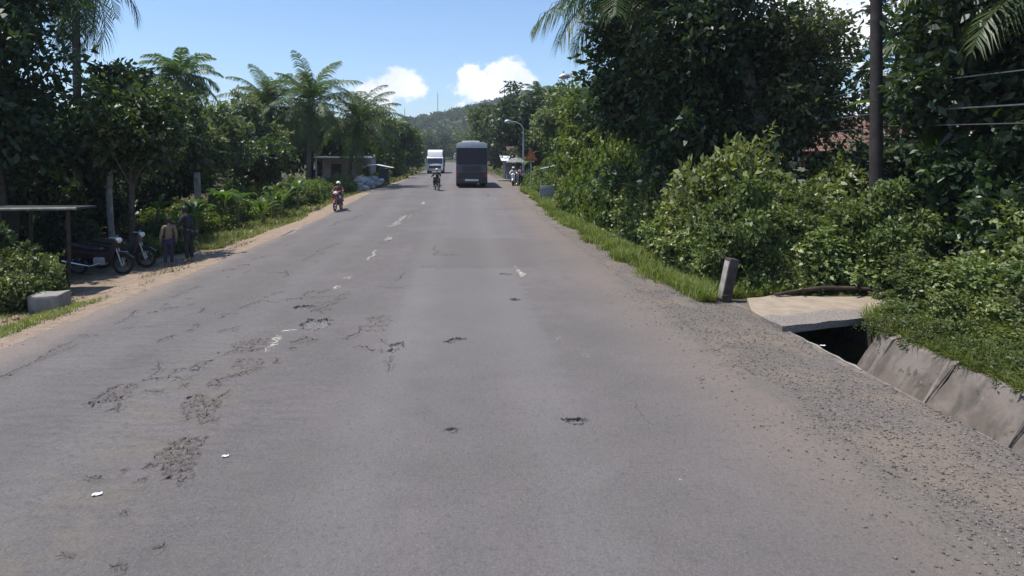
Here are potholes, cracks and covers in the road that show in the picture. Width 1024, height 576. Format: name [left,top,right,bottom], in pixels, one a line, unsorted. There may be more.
crack [150,542,166,557]
crack [630,400,654,426]
crack [55,507,131,564]
pothole [387,341,405,353]
crack [0,195,422,488]
pothole [298,317,334,331]
pothole [561,416,589,425]
